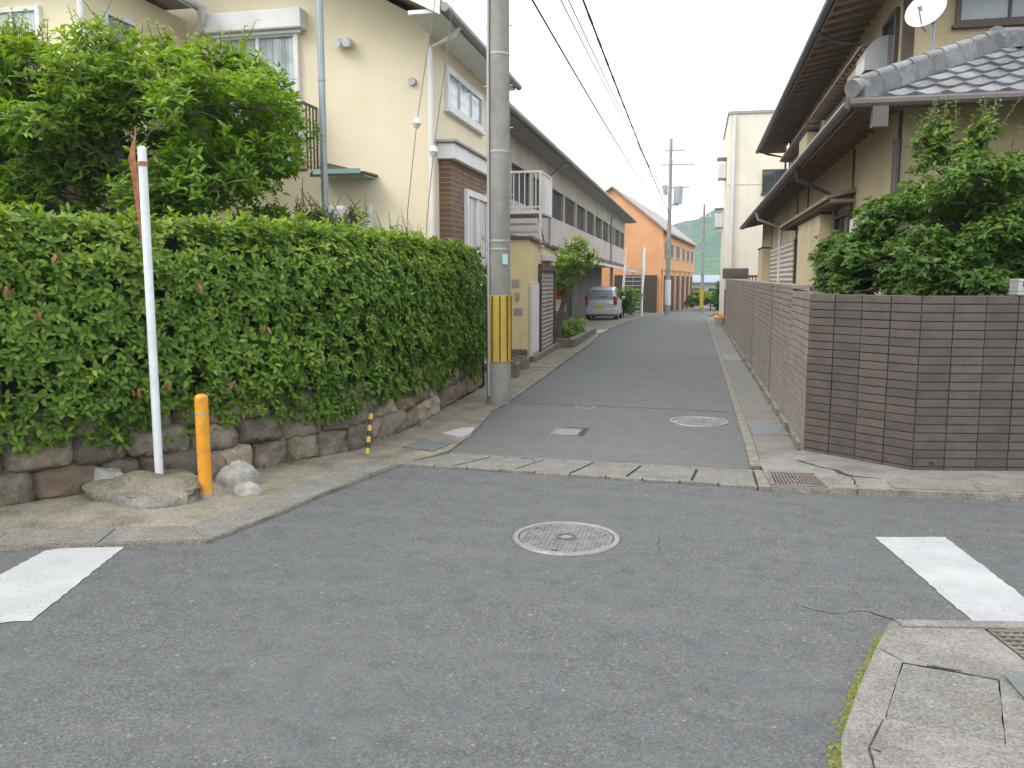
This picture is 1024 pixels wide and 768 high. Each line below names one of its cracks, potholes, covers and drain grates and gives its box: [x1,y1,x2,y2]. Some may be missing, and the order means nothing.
drain grate [767,472,828,488]
crack [799,460,881,494]
manhole cover [669,416,729,427]
manhole cover [512,521,620,556]
crack [792,603,894,620]
drain grate [987,629,1024,660]
